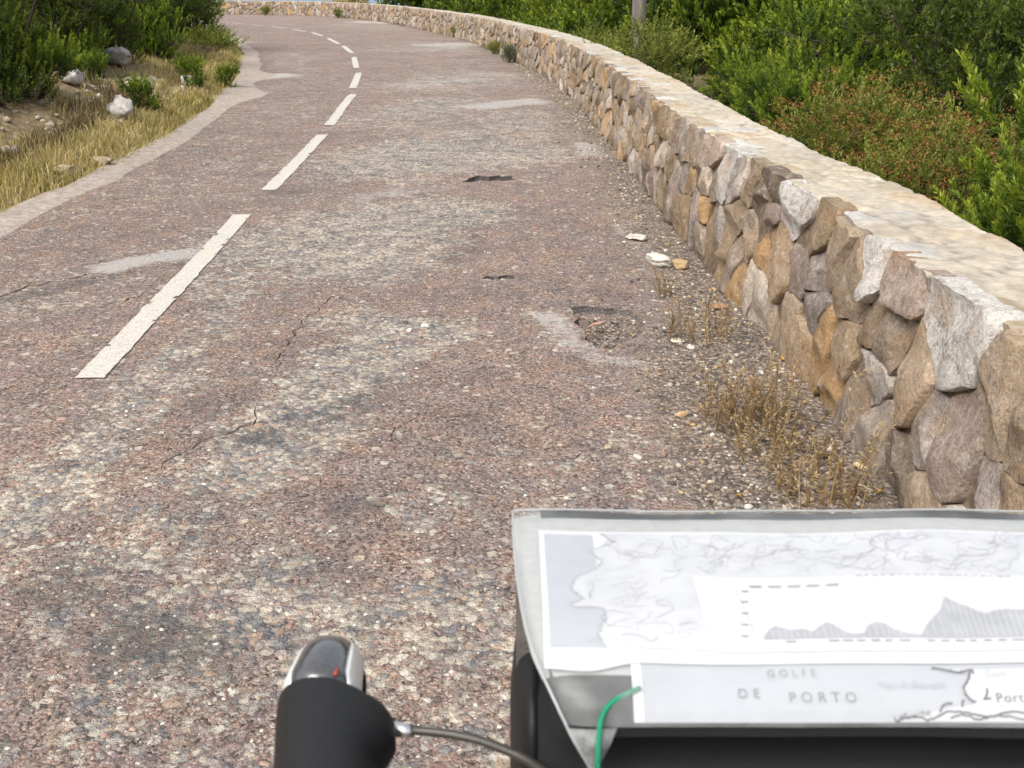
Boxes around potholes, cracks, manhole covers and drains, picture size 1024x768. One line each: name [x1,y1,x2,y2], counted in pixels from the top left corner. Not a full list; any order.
crack [0,270,106,297]
crack [274,294,338,373]
pothole [571,306,643,350]
